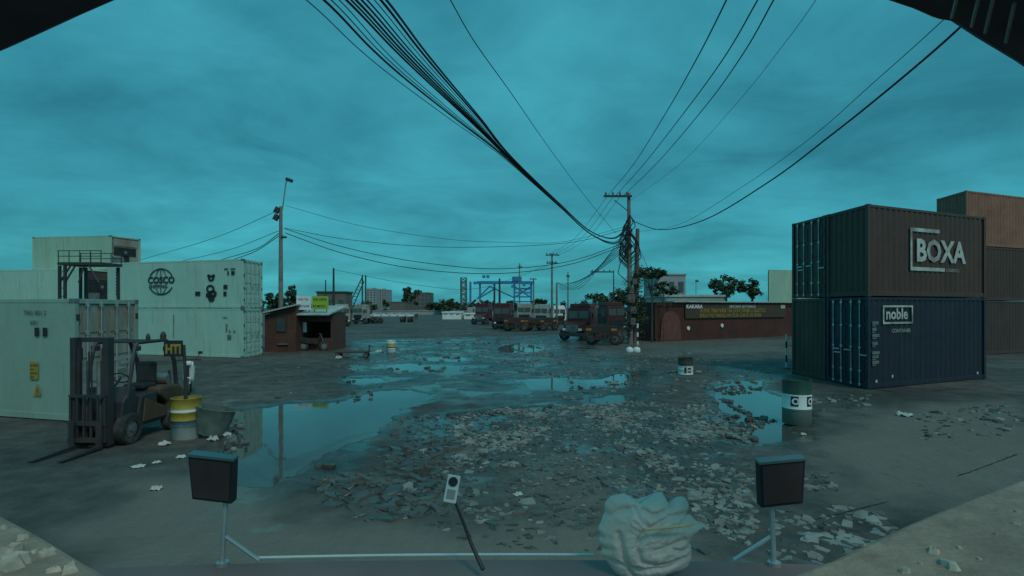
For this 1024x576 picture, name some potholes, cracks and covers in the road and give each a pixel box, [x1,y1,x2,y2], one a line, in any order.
pothole [589,393,627,404]
pothole [710,379,803,444]
pothole [346,376,387,384]
pothole [445,405,553,420]
pothole [512,372,630,392]
